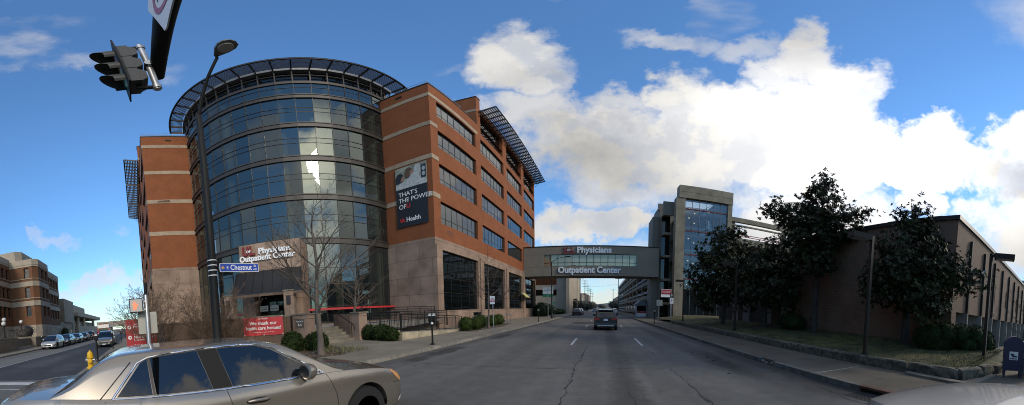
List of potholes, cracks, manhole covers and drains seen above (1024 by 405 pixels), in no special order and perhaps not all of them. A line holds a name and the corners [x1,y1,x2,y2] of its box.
crack [408,340,653,405]
